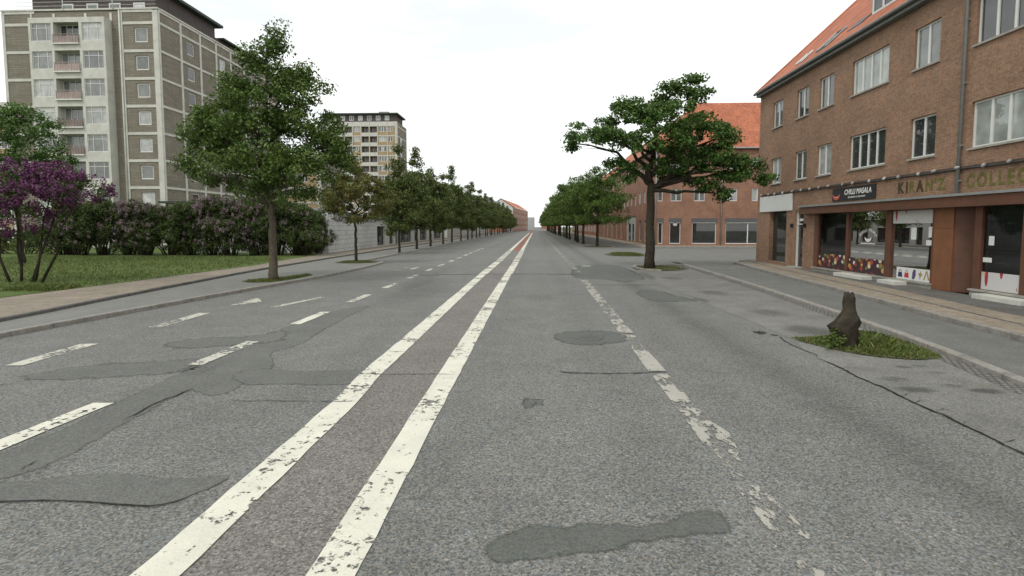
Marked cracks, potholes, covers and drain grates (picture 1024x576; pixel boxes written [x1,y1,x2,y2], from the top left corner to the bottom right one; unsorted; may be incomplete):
crack [780,336,1024,454]
